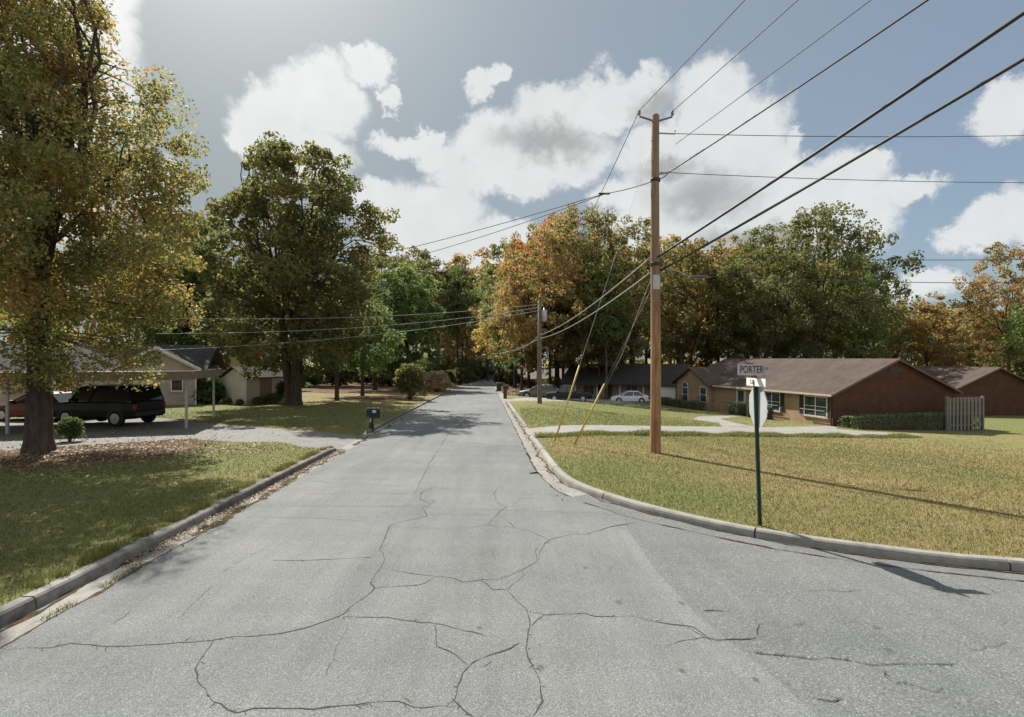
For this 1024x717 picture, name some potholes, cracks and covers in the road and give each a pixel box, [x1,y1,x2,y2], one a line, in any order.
crack [749,651,953,692]
crack [19,432,715,717]
